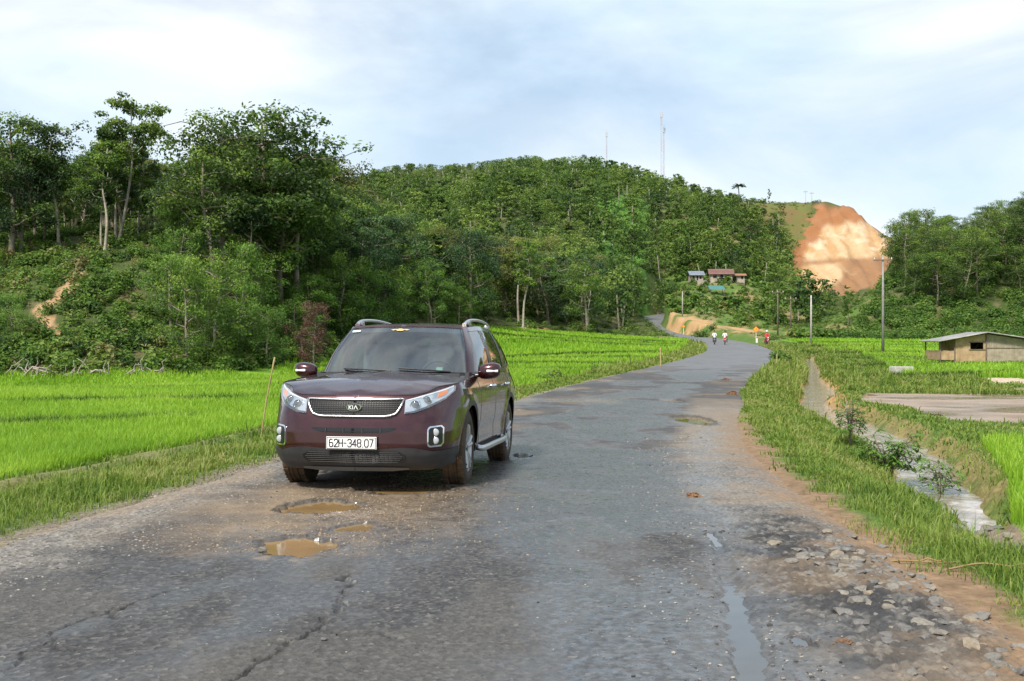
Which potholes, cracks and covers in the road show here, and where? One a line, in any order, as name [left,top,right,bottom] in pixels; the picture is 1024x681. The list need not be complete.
pothole [272,498,370,515]
pothole [252,534,345,557]
pothole [666,415,719,426]
crack [230,574,388,681]
crack [2,587,182,676]
pothole [328,521,380,531]
